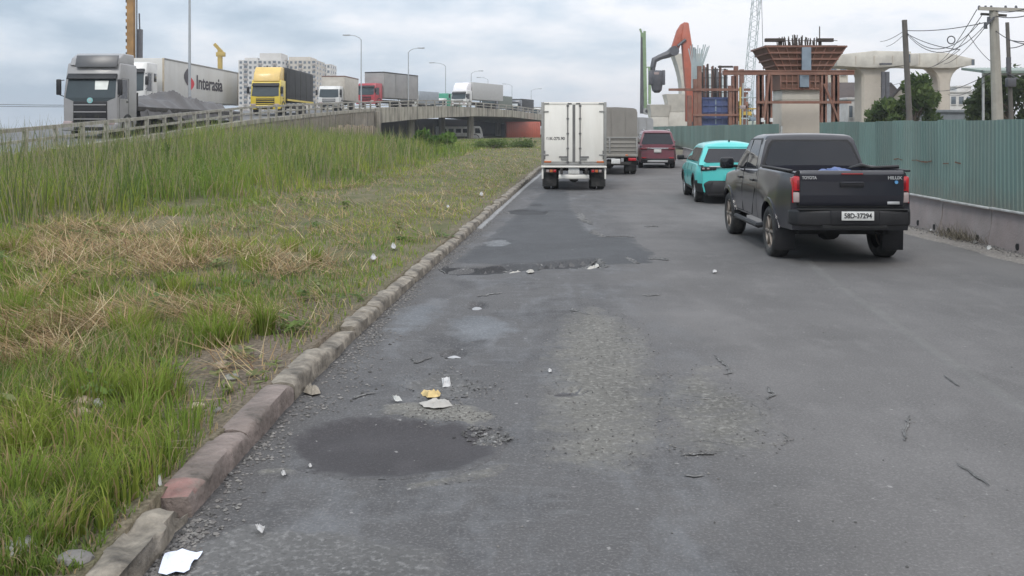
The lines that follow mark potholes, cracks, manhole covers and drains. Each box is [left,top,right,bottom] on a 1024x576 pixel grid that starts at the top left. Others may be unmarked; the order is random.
pothole [441,259,595,276]
crack [714,355,733,375]
crack [669,386,789,445]
crack [902,415,911,441]
pothole [285,416,509,481]
crack [957,463,989,485]
